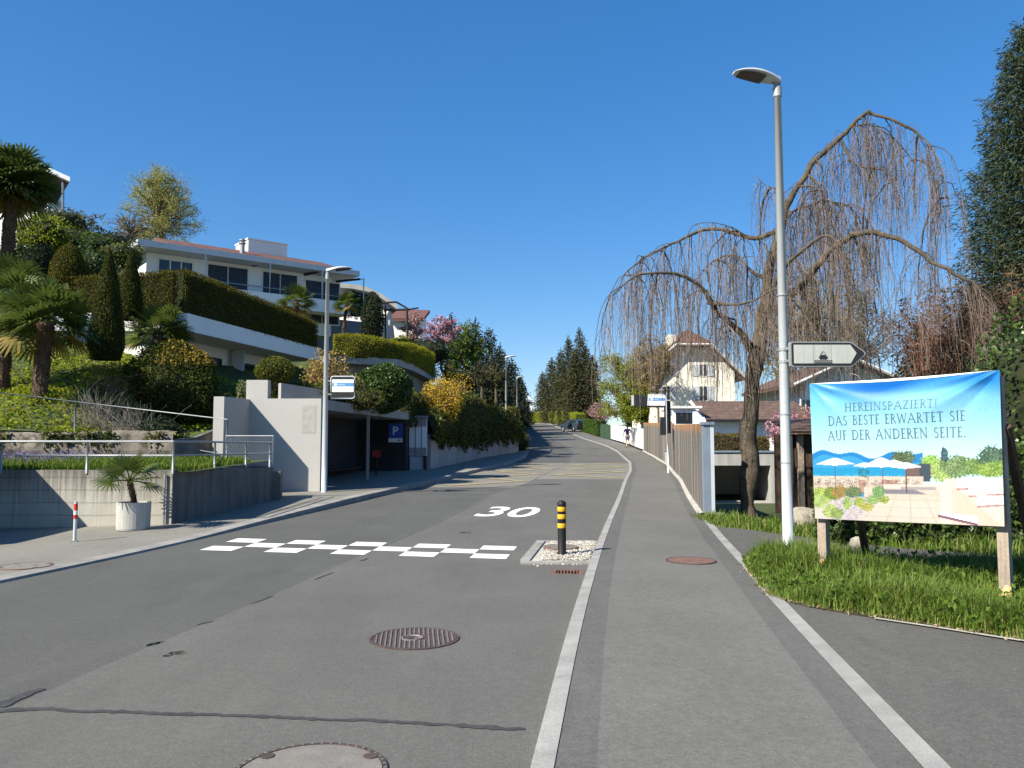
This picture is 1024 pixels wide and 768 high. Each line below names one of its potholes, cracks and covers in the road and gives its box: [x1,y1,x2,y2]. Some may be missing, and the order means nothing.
manhole cover [369,627,459,650]
manhole cover [236,742,388,768]
manhole cover [0,562,53,571]
manhole cover [666,557,717,565]
